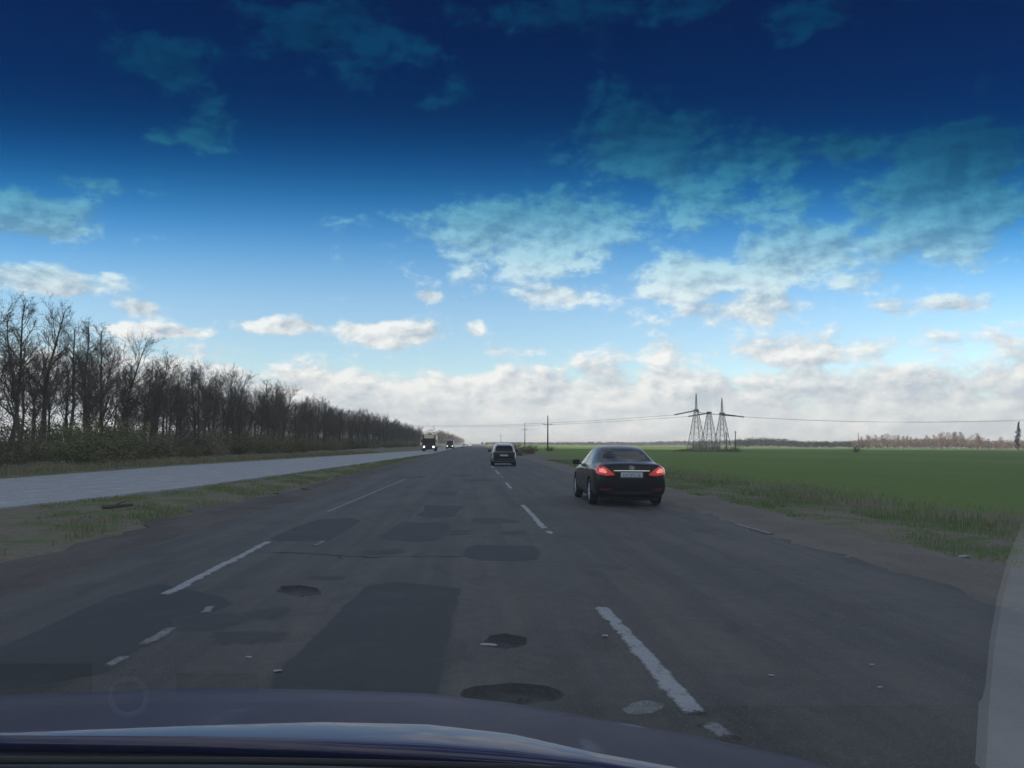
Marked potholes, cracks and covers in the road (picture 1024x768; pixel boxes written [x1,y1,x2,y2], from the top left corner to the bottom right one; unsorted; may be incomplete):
pothole [484,633,527,649]
pothole [276,585,321,596]
pothole [460,683,564,705]
